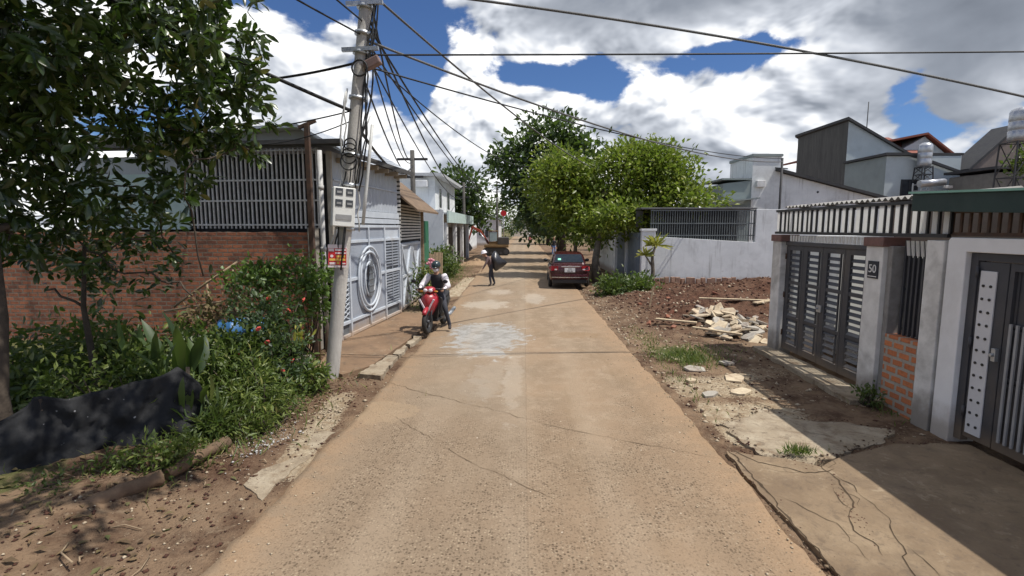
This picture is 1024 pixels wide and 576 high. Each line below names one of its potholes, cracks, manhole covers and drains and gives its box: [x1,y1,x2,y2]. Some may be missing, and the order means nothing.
crack [400,419,550,497]
crack [728,447,940,576]
crack [393,383,724,459]
